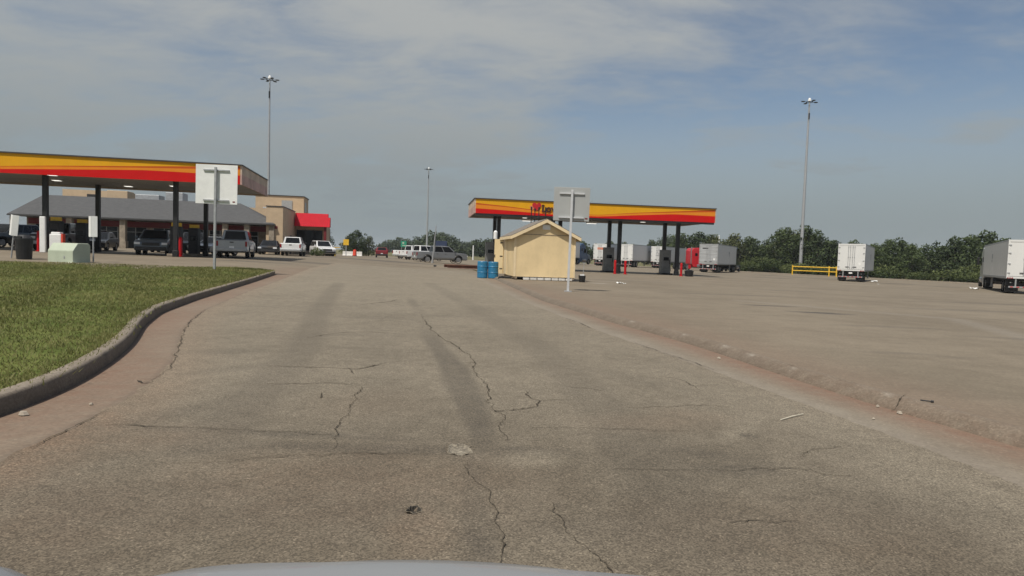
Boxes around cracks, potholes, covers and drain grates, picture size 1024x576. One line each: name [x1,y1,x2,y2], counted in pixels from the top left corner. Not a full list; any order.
crack [425,319,560,439]
crack [464,462,506,562]
crack [109,364,424,463]
crack [552,503,613,572]
